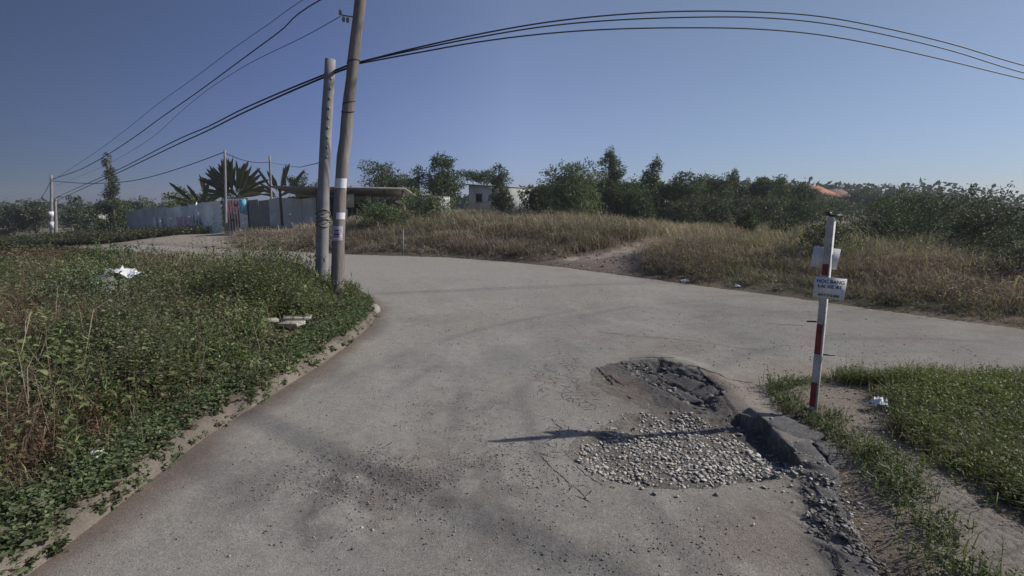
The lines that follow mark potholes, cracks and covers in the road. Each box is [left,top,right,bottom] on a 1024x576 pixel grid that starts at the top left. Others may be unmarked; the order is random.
pothole [589,358,742,415]
crack [539,418,603,501]
pothole [563,411,801,490]
